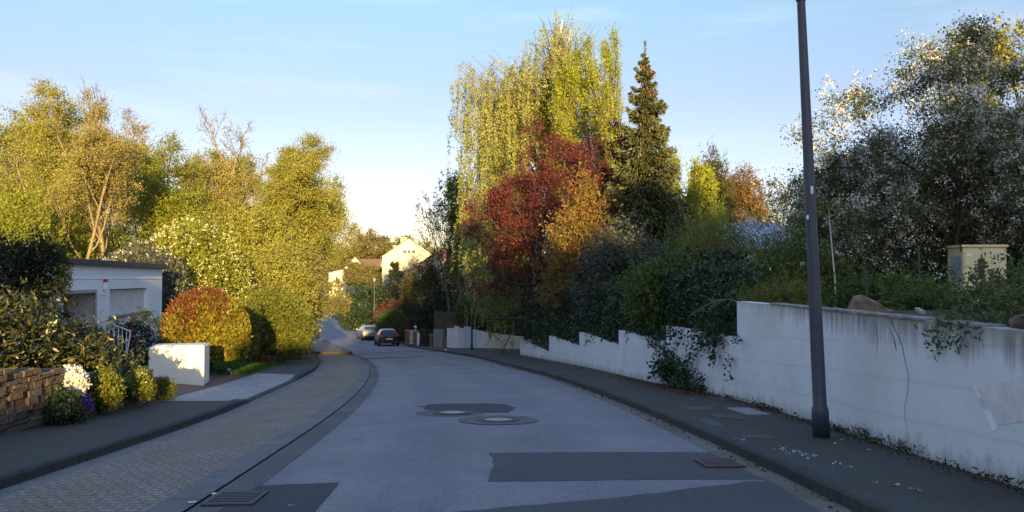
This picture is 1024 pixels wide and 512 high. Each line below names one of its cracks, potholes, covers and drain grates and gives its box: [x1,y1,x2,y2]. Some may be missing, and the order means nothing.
drain grate [201,491,269,506]
